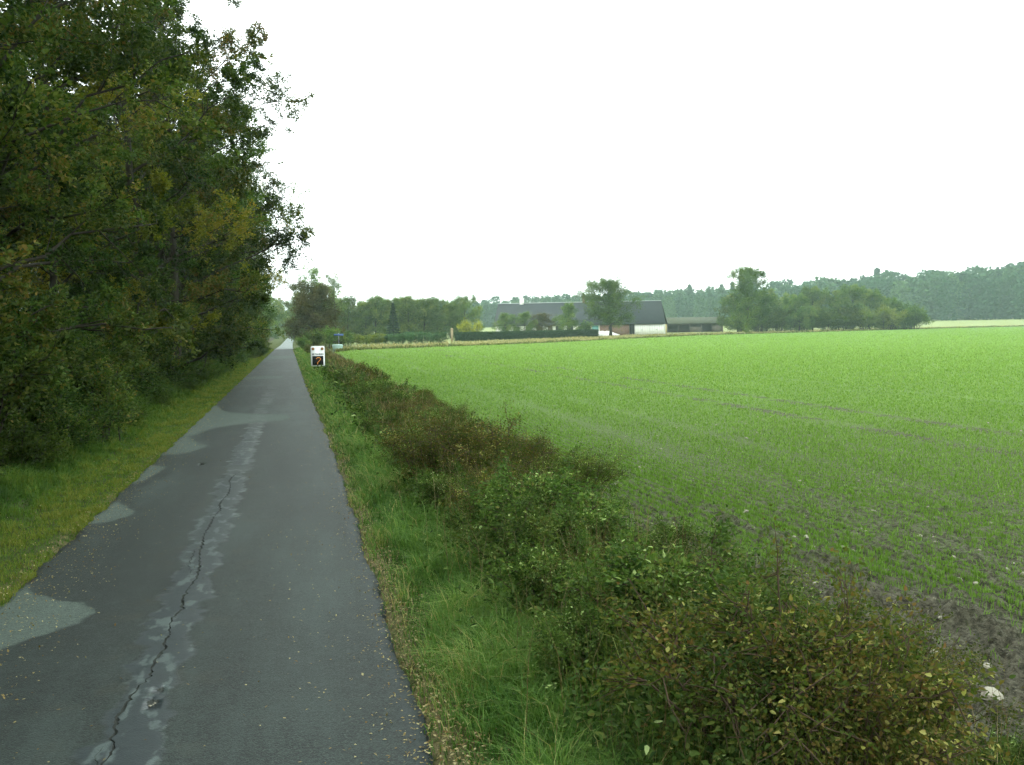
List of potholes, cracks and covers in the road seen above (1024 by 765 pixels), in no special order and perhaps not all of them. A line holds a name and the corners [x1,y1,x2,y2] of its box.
crack [95,473,237,765]
